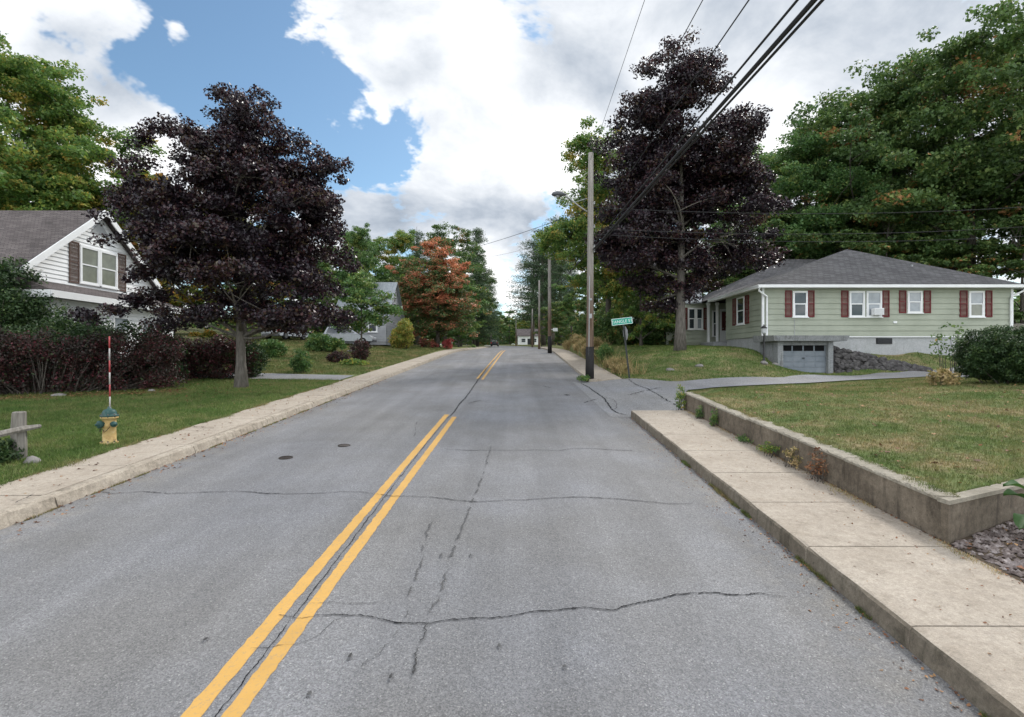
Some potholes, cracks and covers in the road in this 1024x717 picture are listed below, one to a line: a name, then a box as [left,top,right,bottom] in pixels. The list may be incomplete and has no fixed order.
crack [581,379,674,415]
crack [106,447,777,699]
